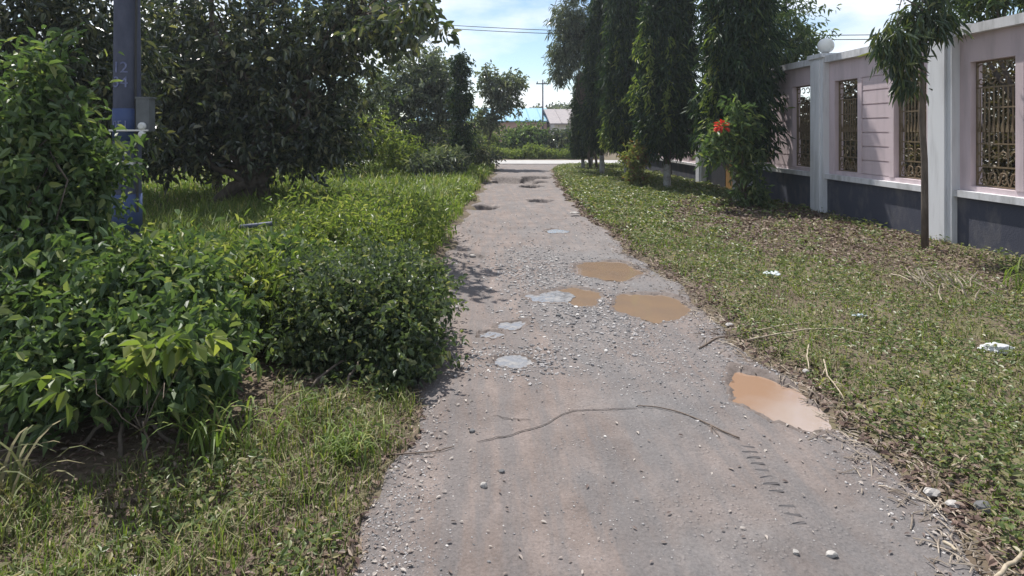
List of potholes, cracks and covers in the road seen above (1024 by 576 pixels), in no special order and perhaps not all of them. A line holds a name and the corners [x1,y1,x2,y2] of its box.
pothole [569,259,649,283]
pothole [548,285,605,308]
pothole [519,175,552,185]
pothole [605,291,699,325]
crack [478,408,623,442]
pothole [721,362,844,438]
